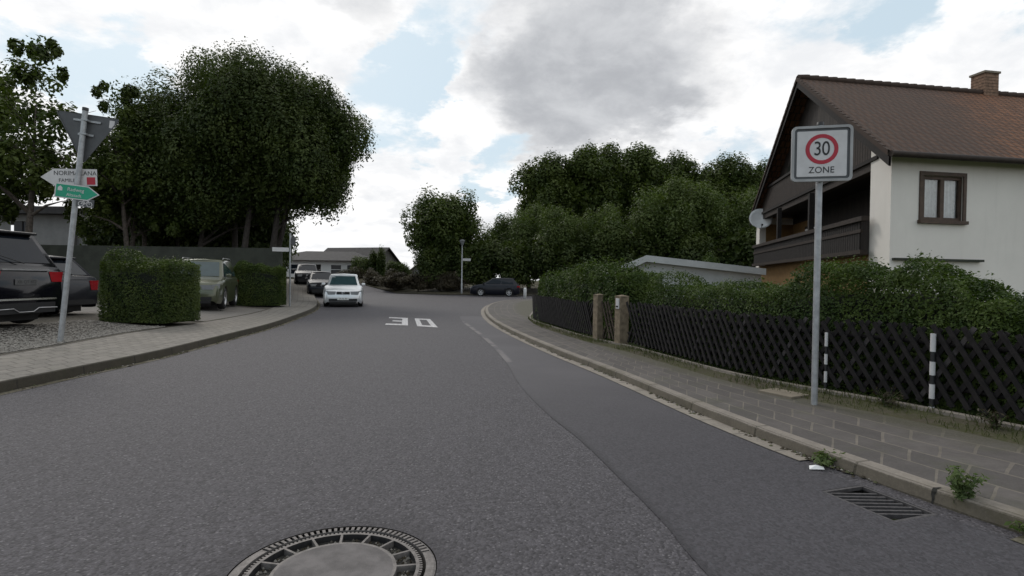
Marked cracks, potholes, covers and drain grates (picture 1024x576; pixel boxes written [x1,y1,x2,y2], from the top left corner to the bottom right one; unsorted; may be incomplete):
manhole cover [228,527,437,576]
drain grate [822,485,939,522]
